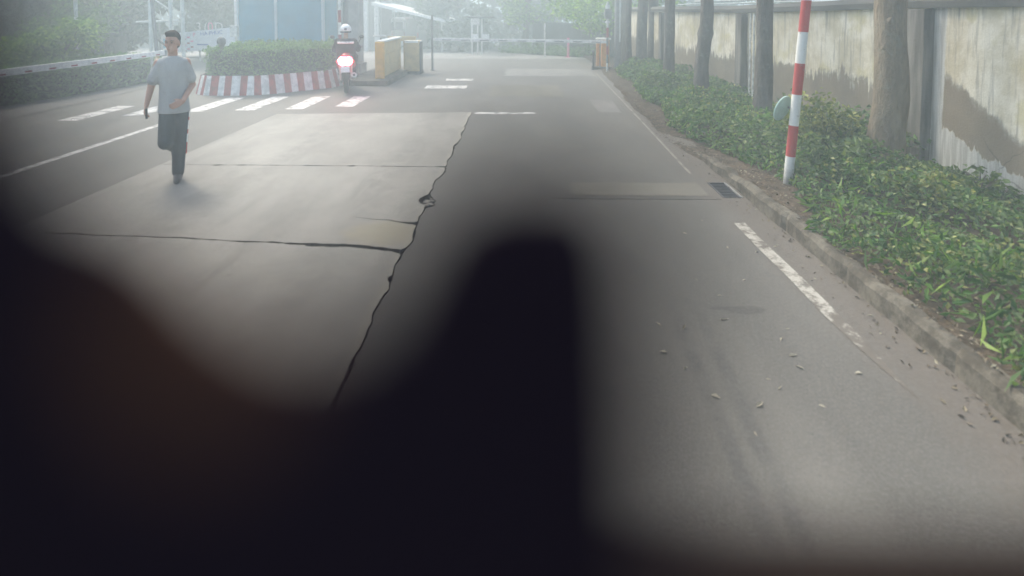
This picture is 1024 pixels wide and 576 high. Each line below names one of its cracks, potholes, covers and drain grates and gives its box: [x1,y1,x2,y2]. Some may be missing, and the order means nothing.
drain grate [707,182,743,198]
crack [223,240,357,248]
